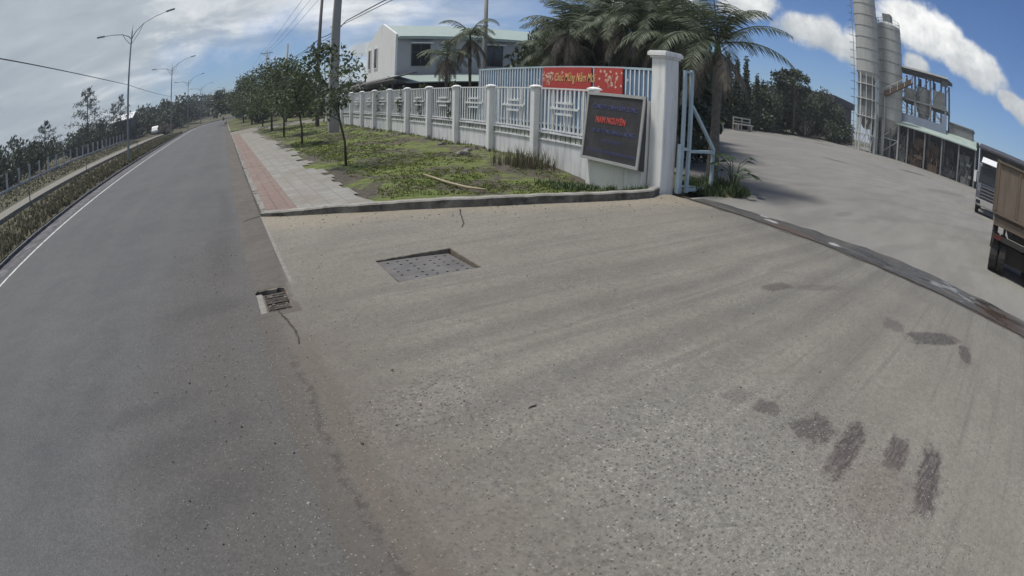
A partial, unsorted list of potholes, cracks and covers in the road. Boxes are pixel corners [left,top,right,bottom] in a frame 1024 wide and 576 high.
manhole cover [375,248,481,282]
drain grate [254,286,295,315]
crack [277,311,300,344]
